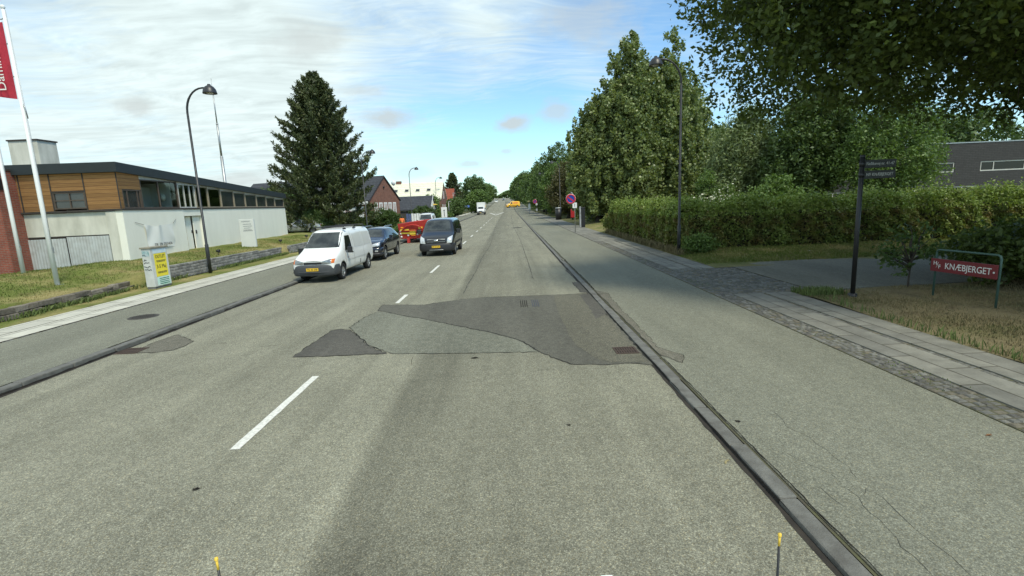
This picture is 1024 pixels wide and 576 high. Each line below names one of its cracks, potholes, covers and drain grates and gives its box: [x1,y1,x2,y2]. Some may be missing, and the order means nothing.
drain grate [612,346,639,354]
crack [771,410,971,576]
